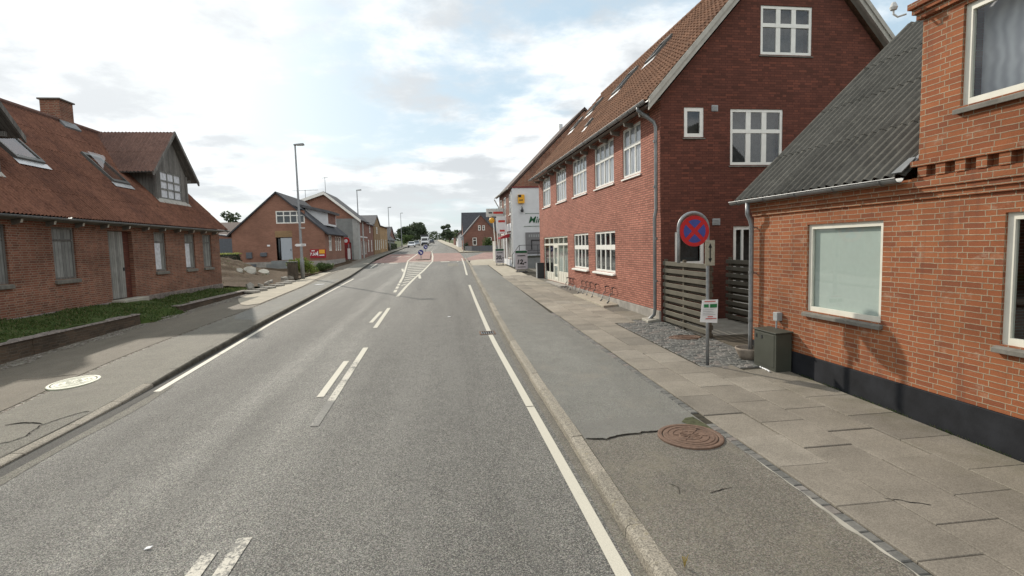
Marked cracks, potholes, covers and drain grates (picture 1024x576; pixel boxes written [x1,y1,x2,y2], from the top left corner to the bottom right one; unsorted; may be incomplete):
manhole cover [45,375,101,391]
manhole cover [657,424,724,450]
crack [586,430,658,440]
crack [0,411,89,444]
